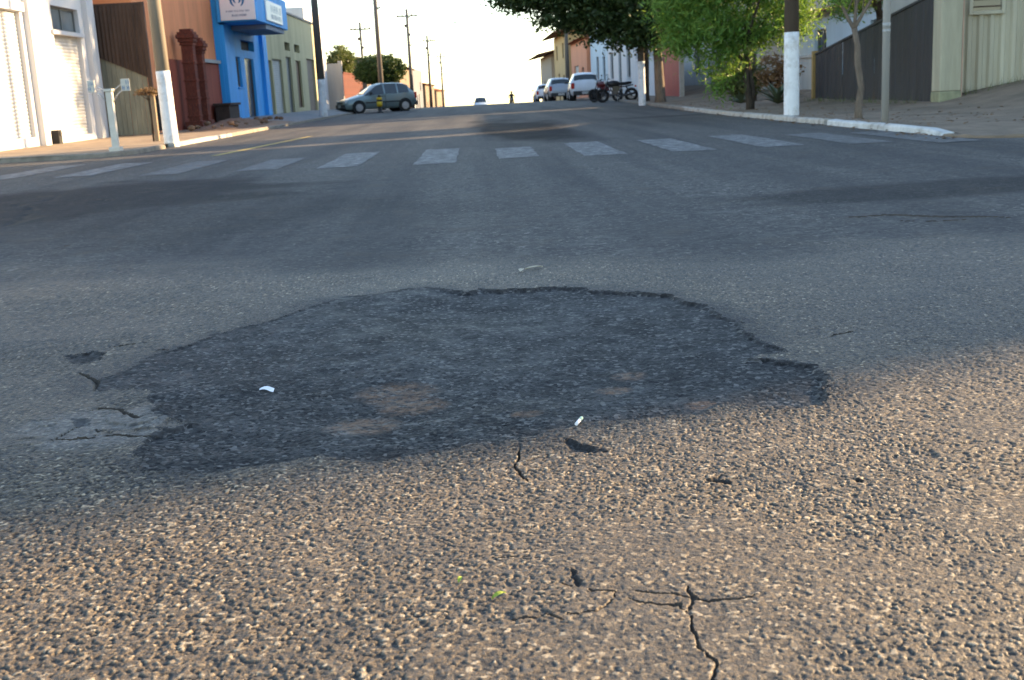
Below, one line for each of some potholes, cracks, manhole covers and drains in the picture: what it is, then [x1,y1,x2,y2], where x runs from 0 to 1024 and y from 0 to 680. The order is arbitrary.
crack [849,214,1010,222]
crack [506,449,529,482]
pothole [93,286,831,475]
crack [51,372,157,442]
crack [512,582,755,680]
pothole [63,350,107,366]
